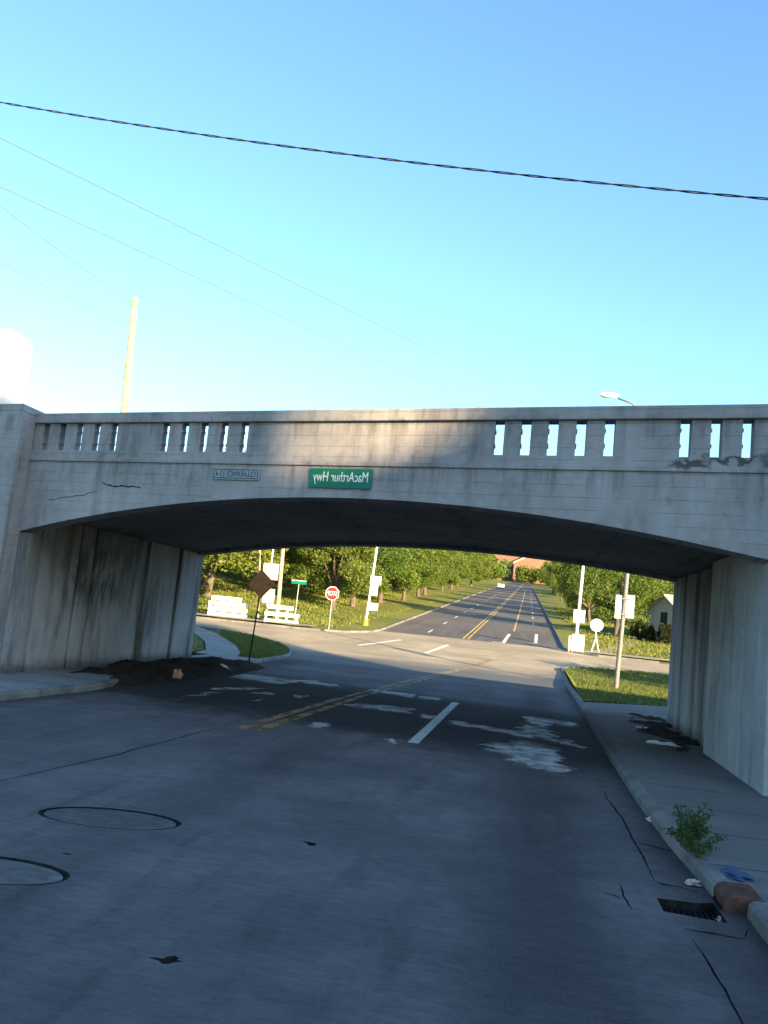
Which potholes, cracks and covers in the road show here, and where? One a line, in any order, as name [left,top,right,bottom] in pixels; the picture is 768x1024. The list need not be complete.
crack [604,792,701,909]
manhole cover [0,856,70,885]
pothole [149,956,184,964]
drain grate [657,881,763,923]
manhole cover [38,807,181,830]
crack [683,928,748,1024]
crack [1,727,221,781]
